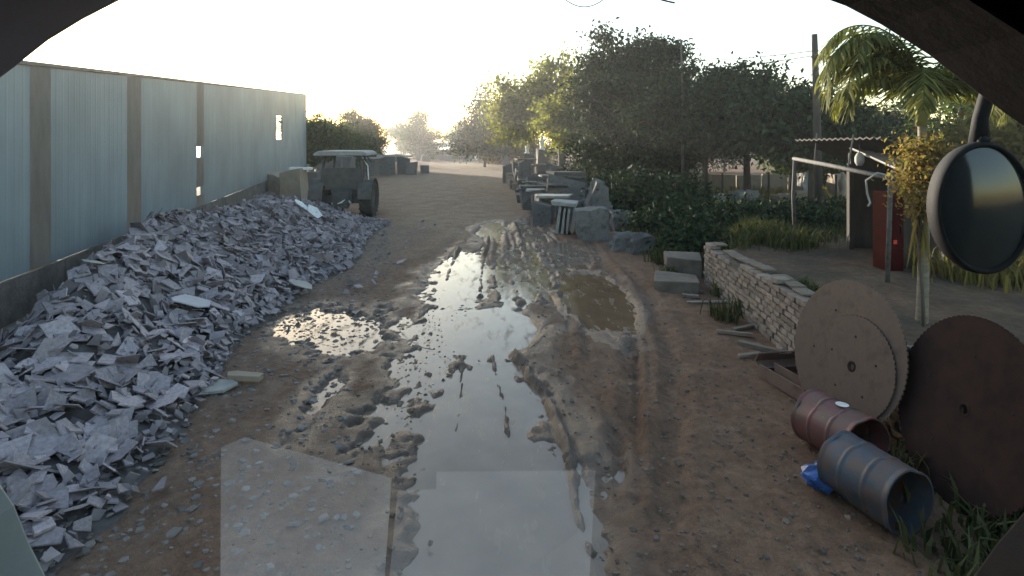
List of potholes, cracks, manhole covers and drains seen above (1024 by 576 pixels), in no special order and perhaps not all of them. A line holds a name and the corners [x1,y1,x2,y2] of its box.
pothole [426,303,550,367]
